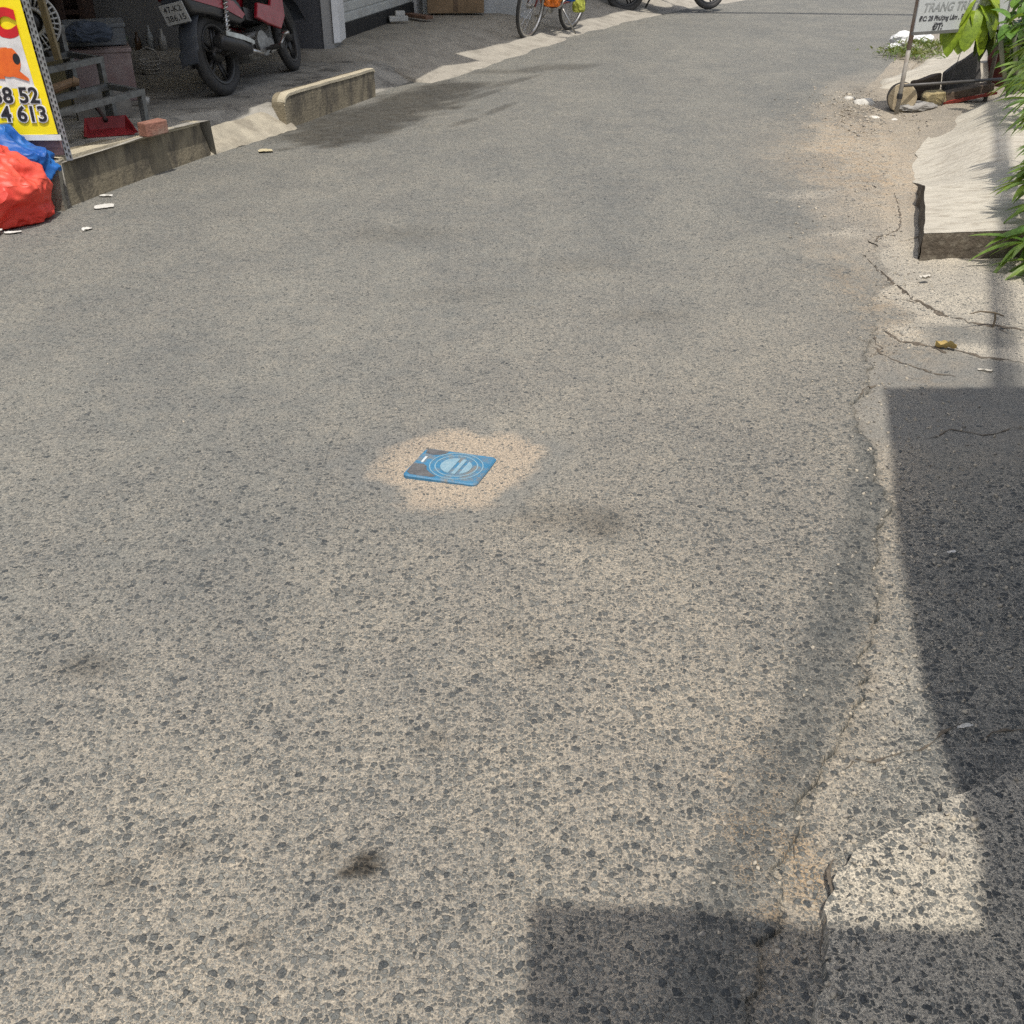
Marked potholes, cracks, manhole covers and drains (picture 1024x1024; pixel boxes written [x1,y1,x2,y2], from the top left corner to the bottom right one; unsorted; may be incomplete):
crack [846,723,962,768]
crack [980,728,1024,741]
crack [926,427,1024,439]
crack [819,859,838,961]
crack [856,259,1023,377]
manhole cover [404,449,496,487]
